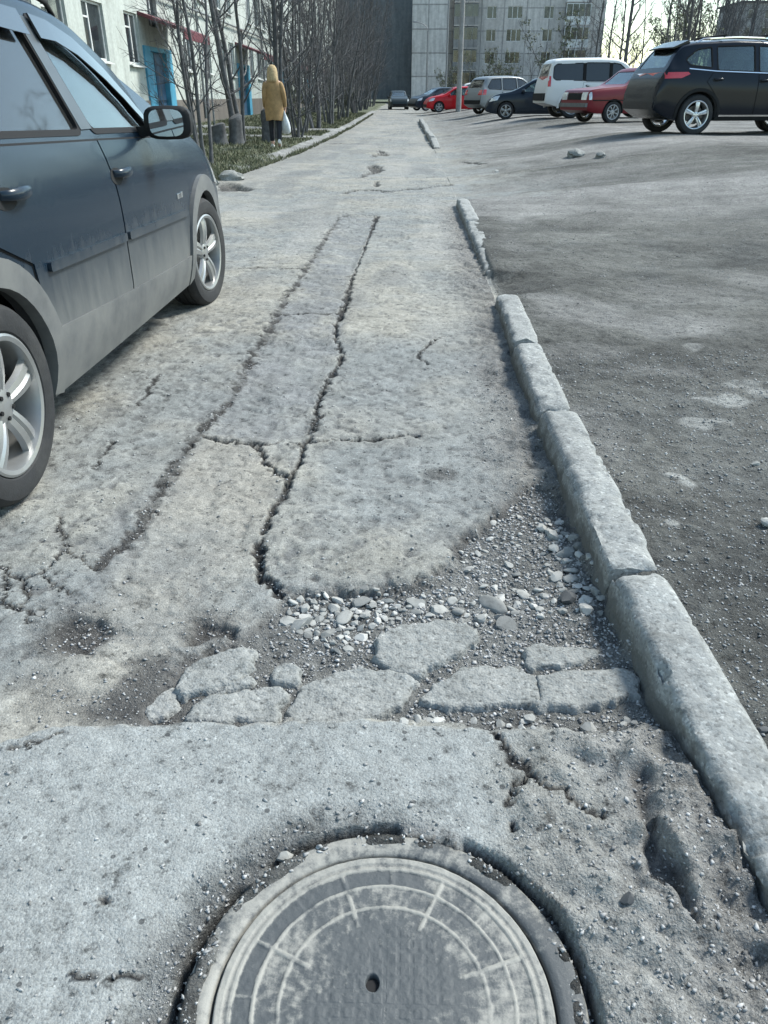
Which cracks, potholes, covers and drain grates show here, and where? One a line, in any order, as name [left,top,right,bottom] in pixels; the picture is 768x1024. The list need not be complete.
pothole [47,615,115,657]
pothole [134,481,670,736]
crack [415,335,451,365]
crack [63,968,141,983]
crack [341,176,454,194]
pothole [624,758,703,924]
crack [488,731,608,833]
crack [0,214,420,624]
manhole cover [192,837,590,1024]
pothole [355,164,385,179]
